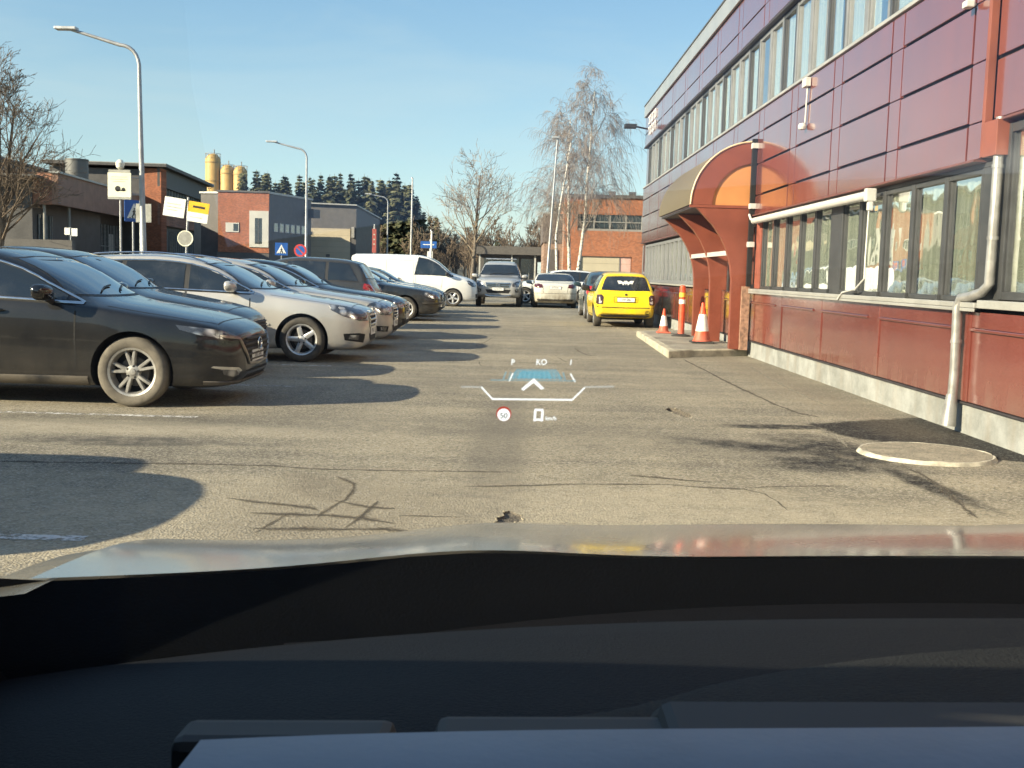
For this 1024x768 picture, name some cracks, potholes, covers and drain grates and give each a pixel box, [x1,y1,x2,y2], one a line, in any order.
crack [685,360,848,448]
pothole [663,407,693,418]
crack [613,475,790,510]
manhole cover [856,442,998,467]
pothole [493,511,525,523]
crack [4,461,542,533]
